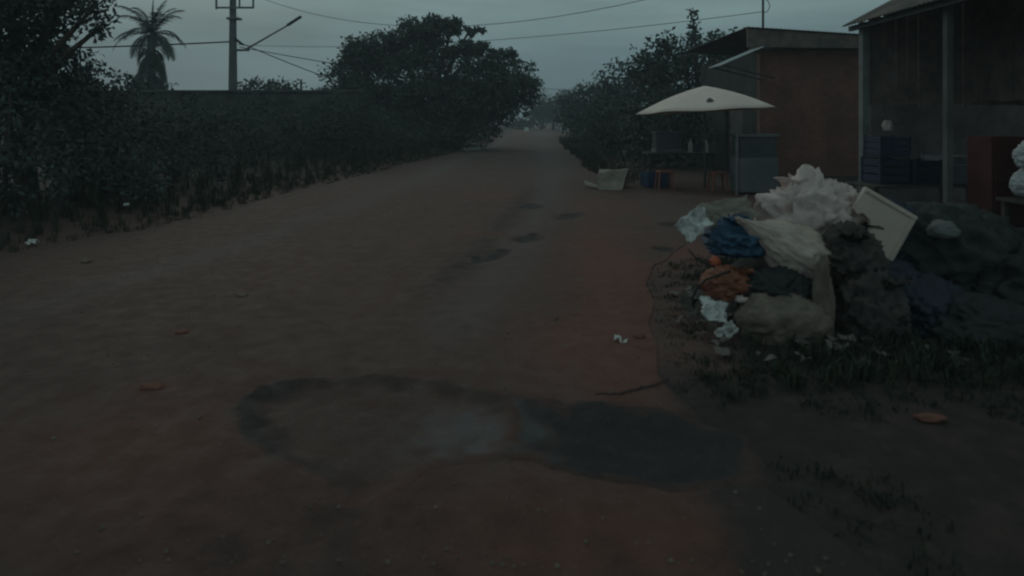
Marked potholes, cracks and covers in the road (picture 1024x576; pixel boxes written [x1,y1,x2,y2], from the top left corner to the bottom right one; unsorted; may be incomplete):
pothole [511,233,547,243]
pothole [554,212,585,220]
pothole [463,249,512,266]
pothole [224,372,519,508]
pothole [499,394,773,493]
